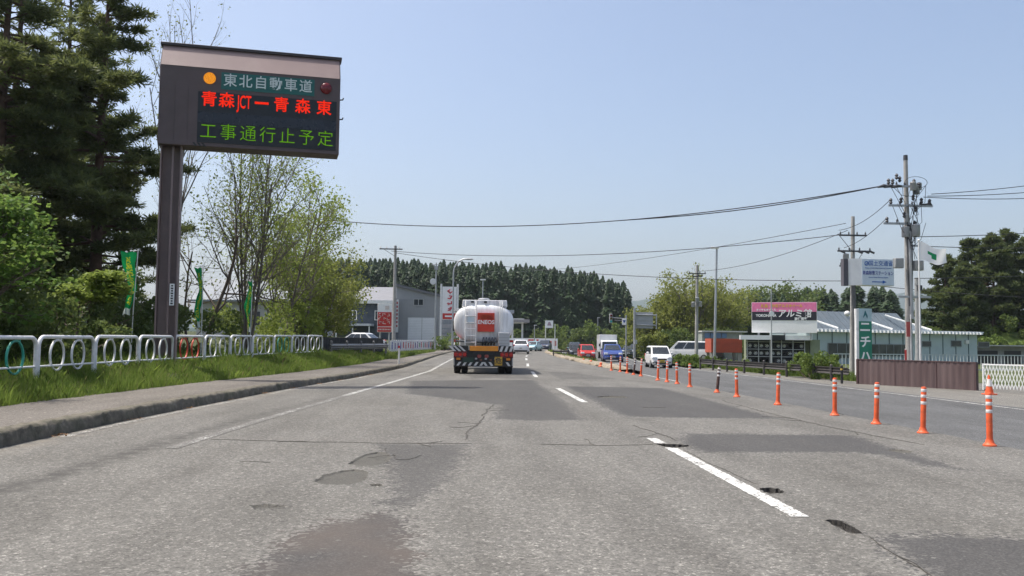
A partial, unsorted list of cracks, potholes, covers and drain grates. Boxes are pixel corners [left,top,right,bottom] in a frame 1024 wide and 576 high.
pothole [241,503,294,511]
crack [869,536,932,576]
pothole [756,487,792,496]
pothole [820,518,868,537]
crack [213,404,495,463]
pothole [308,469,376,487]
